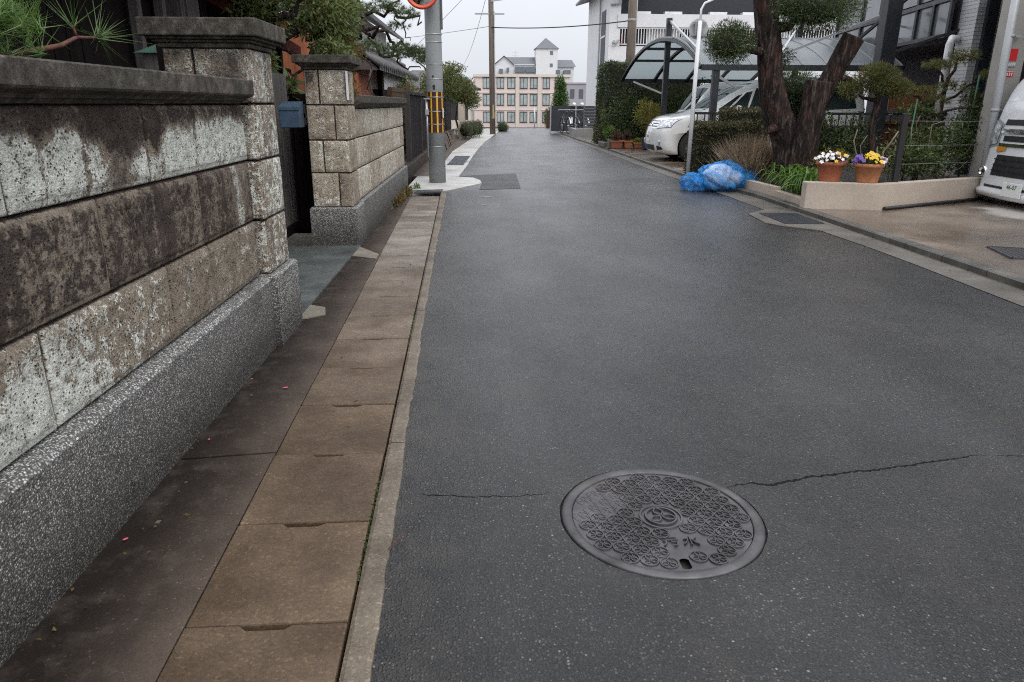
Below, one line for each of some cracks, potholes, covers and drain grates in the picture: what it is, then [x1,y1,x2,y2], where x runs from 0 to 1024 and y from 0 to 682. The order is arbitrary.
drain grate [447,156,470,165]
crack [727,455,1018,488]
manhole cover [560,468,768,580]
drain grate [987,246,1024,260]
drain grate [748,209,848,231]
